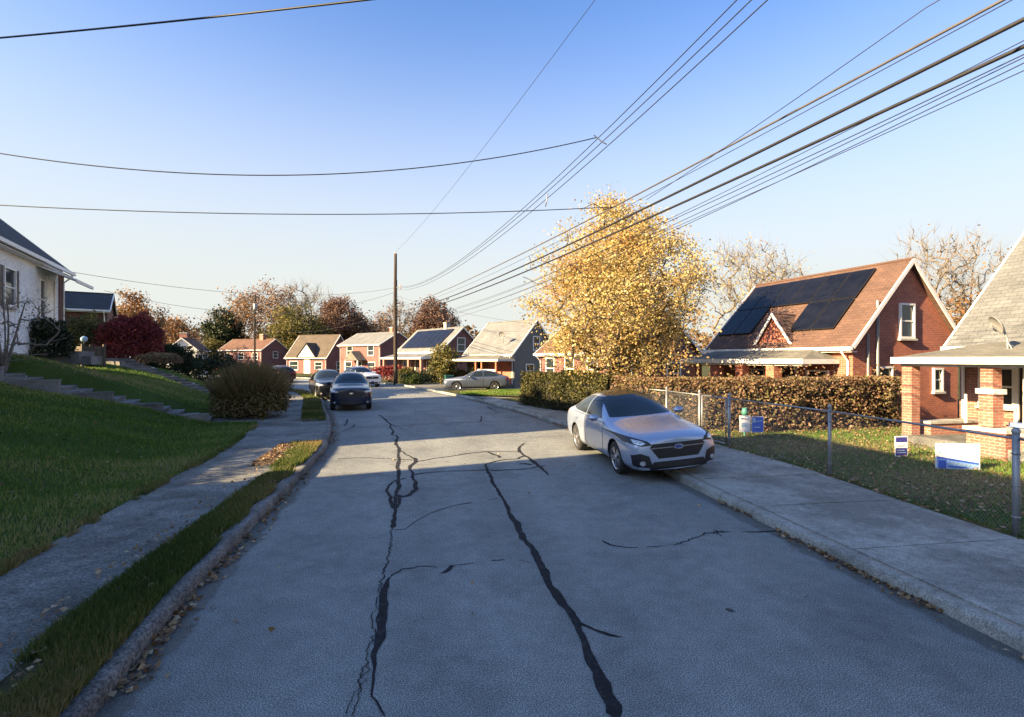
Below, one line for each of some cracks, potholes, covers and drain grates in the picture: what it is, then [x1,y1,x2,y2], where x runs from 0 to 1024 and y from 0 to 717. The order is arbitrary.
crack [603,529,777,548]
crack [391,559,528,576]
